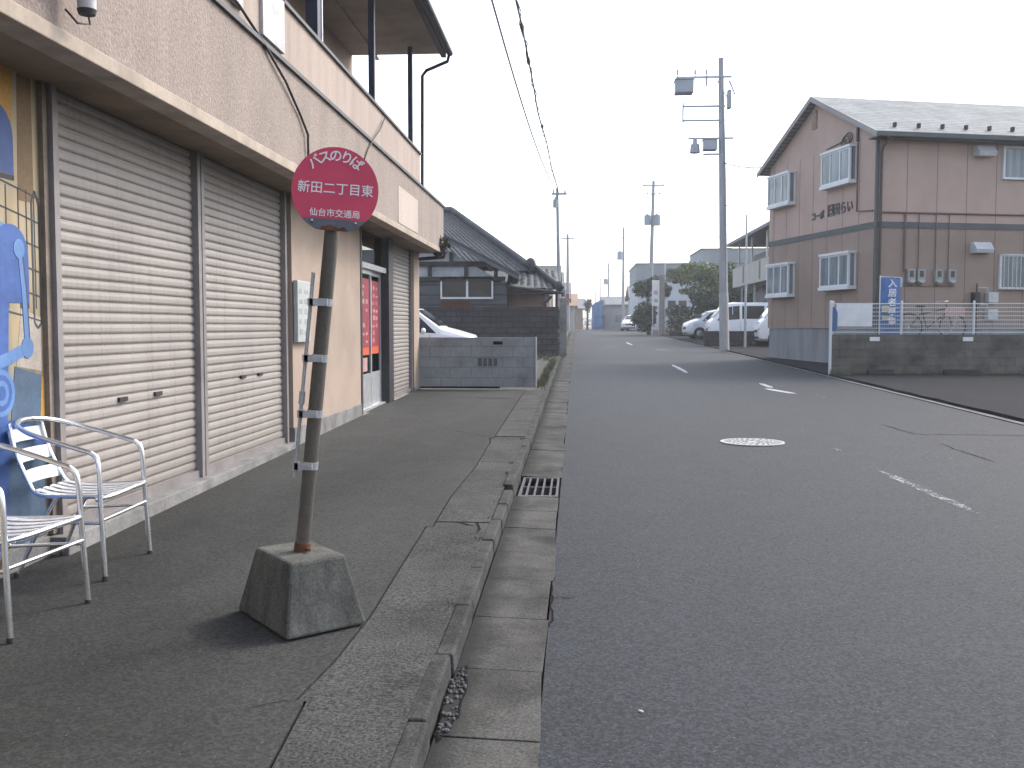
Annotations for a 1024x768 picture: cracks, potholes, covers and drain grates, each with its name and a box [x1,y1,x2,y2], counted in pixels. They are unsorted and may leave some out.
drain grate [518,477,560,498]
manhole cover [720,438,785,446]
crack [886,425,1024,462]
crack [548,576,564,627]
